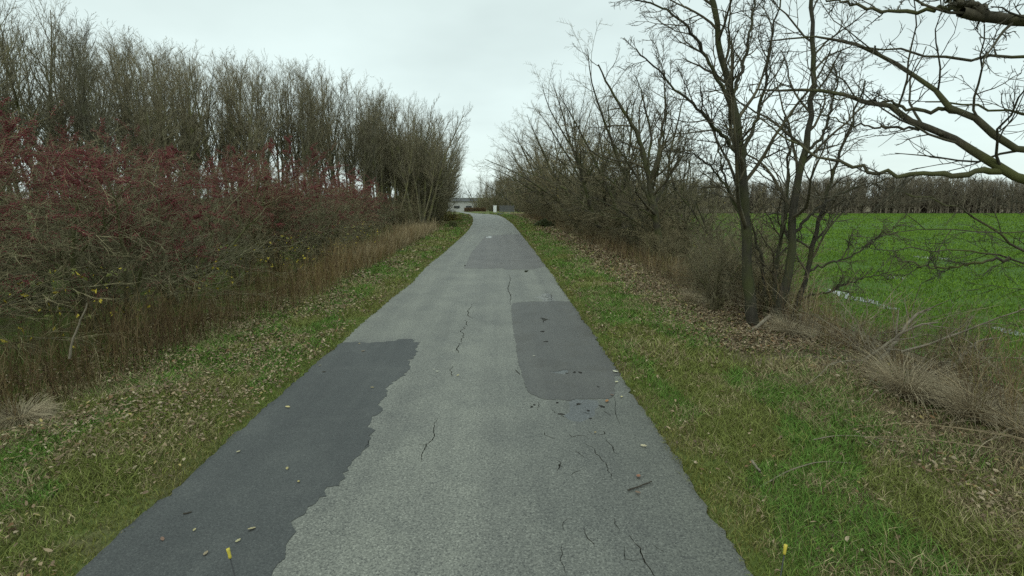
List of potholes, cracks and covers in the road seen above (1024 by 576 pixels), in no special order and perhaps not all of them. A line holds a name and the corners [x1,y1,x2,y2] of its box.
crack [537,402,615,476]
crack [614,518,663,576]
